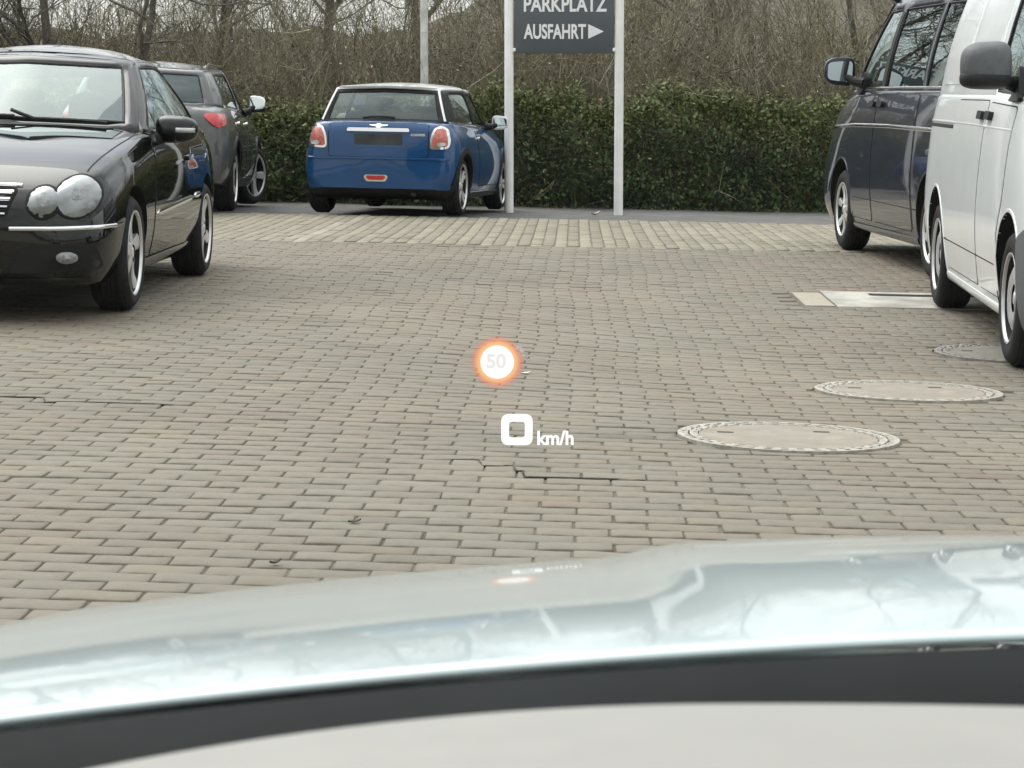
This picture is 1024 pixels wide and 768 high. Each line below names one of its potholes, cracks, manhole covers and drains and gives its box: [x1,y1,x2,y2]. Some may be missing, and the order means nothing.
manhole cover [814,380,1004,404]
crack [452,459,645,481]
manhole cover [934,344,1008,363]
manhole cover [677,422,900,456]
crack [0,396,173,406]
